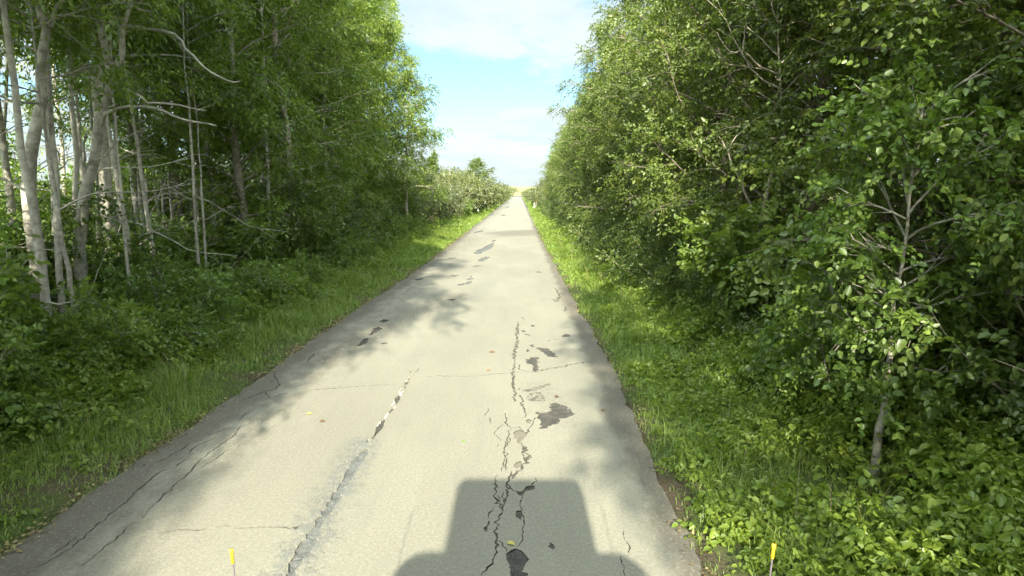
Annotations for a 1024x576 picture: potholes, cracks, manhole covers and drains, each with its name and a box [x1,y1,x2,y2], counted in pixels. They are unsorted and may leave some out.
pothole [535,403,575,429]
pothole [506,548,529,576]
crack [318,322,584,576]
crack [24,373,288,576]
pothole [526,357,539,372]
